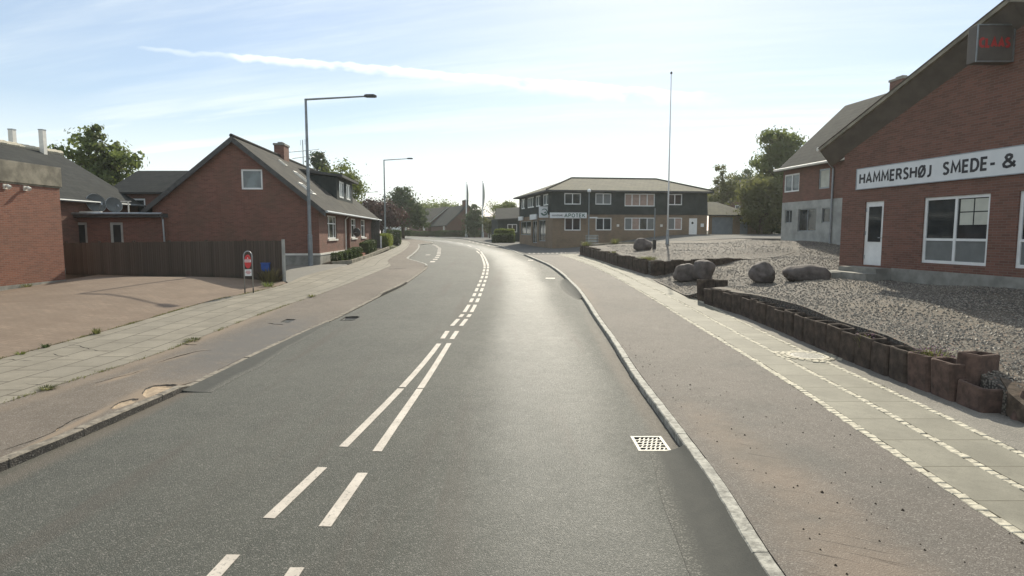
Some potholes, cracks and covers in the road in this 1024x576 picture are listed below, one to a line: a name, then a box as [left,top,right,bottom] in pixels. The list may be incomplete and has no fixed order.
pothole [142,384,177,397]
drain grate [630,436,671,451]
pothole [111,398,138,409]
